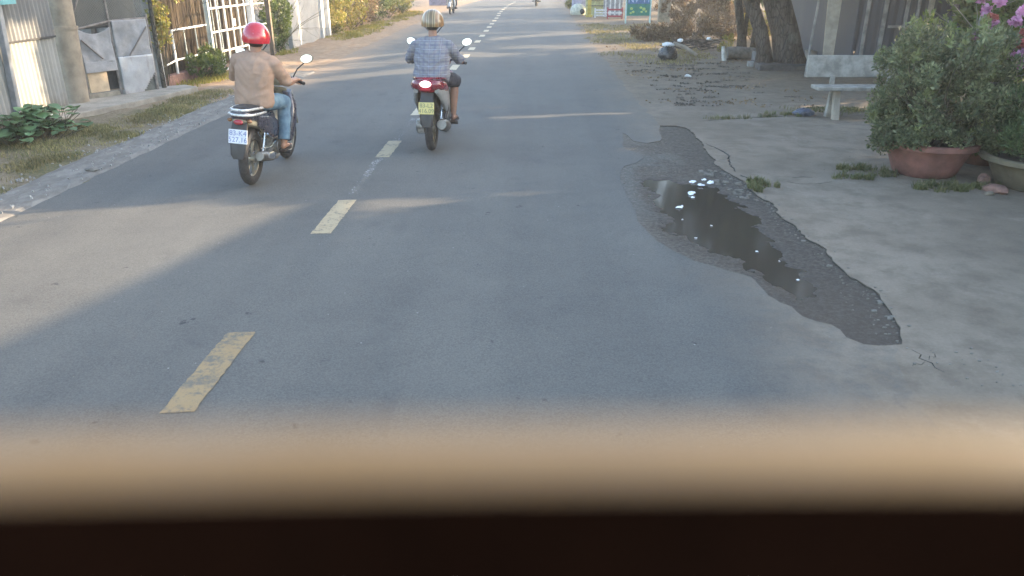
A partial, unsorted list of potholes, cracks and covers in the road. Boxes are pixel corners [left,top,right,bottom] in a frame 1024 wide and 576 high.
crack [707,144,747,178]
pothole [620,126,902,346]
